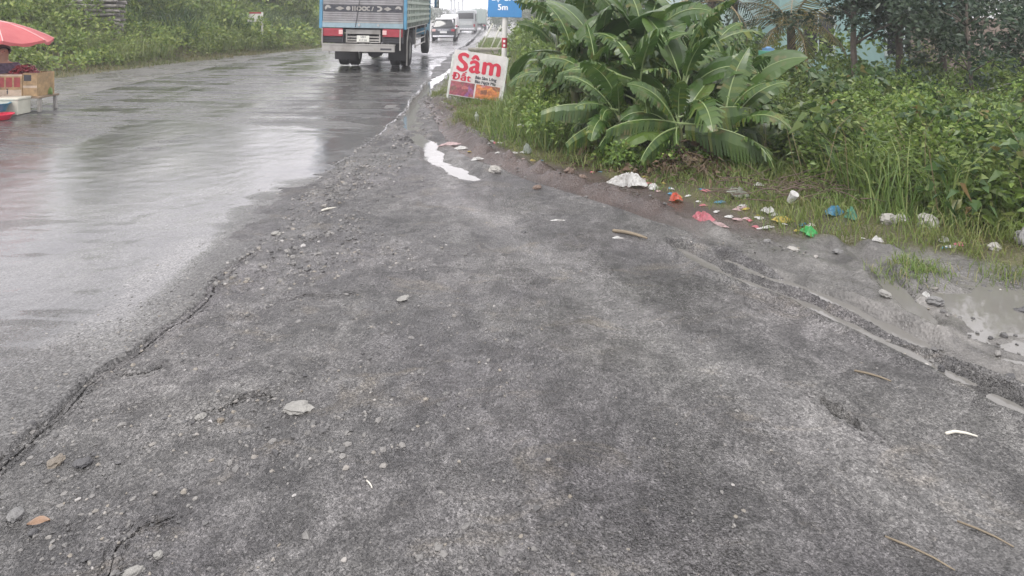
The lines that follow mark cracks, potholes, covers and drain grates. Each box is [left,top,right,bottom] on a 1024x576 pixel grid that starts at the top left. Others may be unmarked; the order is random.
crack [99,507,193,576]
crack [0,251,285,477]
pothole [799,383,896,451]
